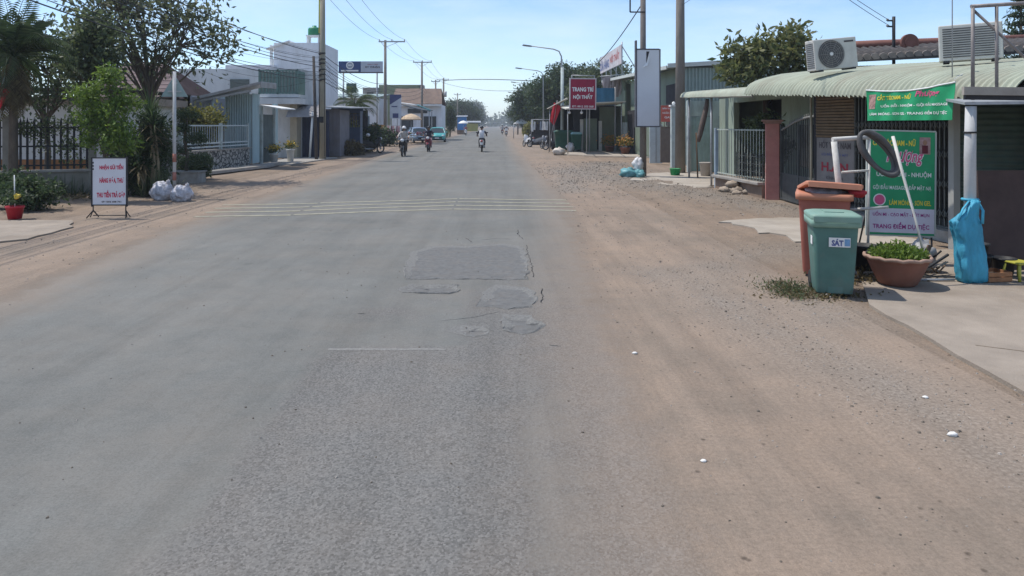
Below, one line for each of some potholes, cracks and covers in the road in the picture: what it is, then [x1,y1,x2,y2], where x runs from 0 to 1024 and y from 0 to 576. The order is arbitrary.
crack [466,230,544,303]
